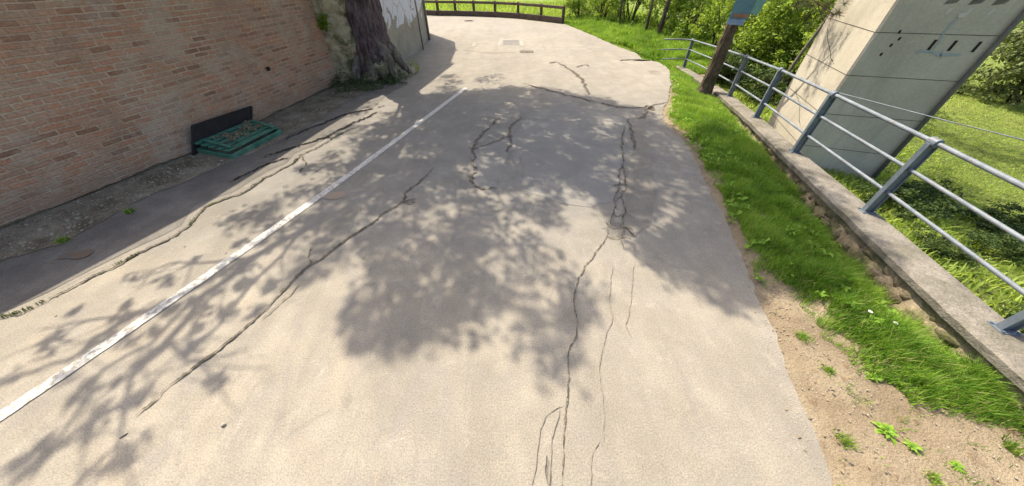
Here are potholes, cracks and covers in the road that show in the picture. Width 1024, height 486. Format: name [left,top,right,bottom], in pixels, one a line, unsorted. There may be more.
crack [469,116,524,189]
crack [531,107,649,486]
crack [549,61,589,93]
crack [133,167,434,418]
crack [0,105,384,318]
